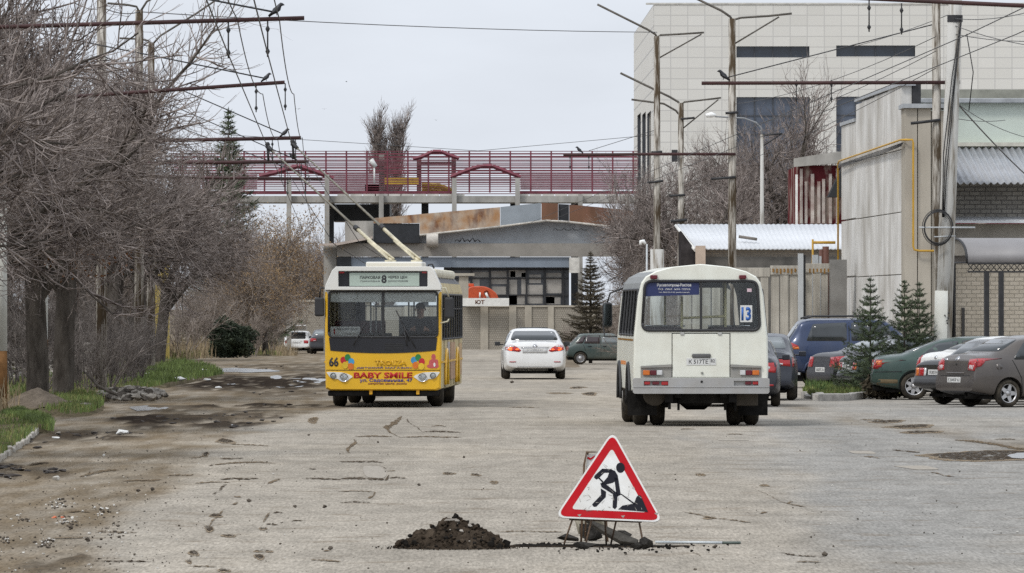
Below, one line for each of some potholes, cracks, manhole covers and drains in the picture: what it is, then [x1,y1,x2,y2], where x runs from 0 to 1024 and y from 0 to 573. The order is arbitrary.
crack [307,416,461,503]
pothole [915,450,1024,462]
crack [684,490,805,522]
